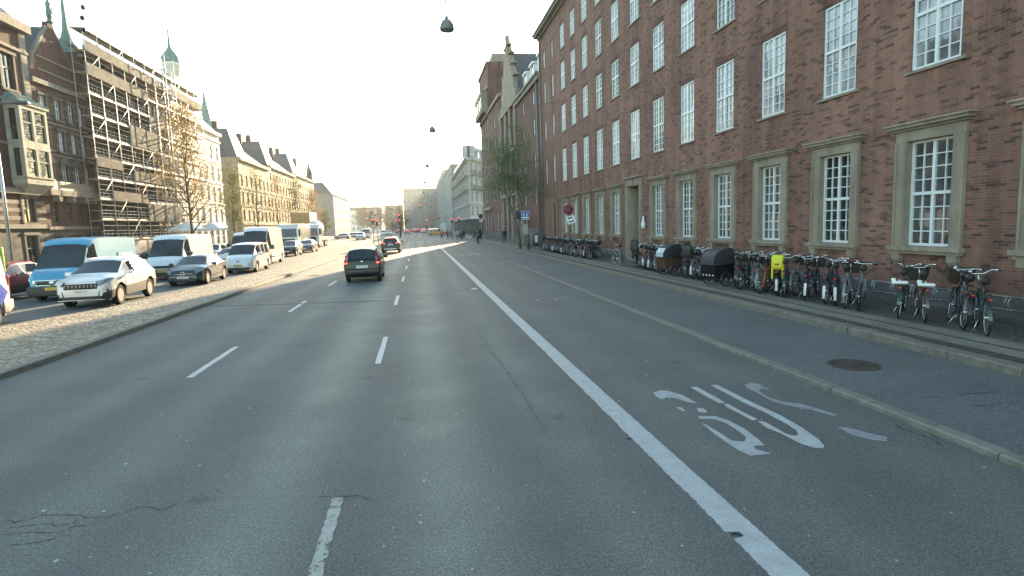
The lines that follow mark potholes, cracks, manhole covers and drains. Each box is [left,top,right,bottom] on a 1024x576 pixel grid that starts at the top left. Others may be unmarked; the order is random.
crack [6,502,177,545]
manhole cover [826,359,881,371]
